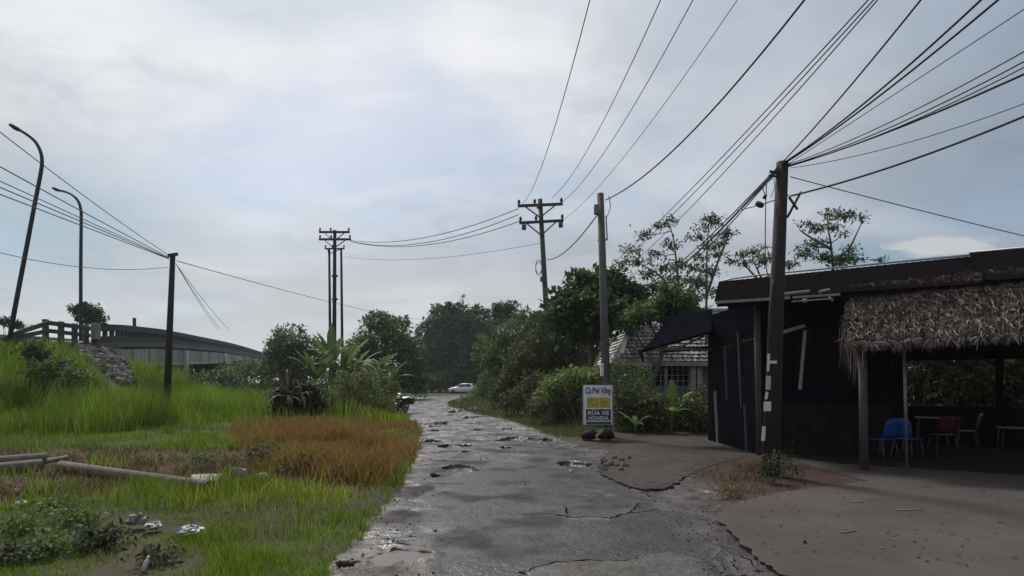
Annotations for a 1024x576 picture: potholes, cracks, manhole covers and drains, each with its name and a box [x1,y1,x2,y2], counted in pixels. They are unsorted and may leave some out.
crack [525,487,664,520]
crack [520,553,653,574]
crack [698,543,765,576]
pothole [354,546,446,574]
pothole [551,460,601,469]
pothole [418,421,452,429]
pothole [433,463,486,474]
